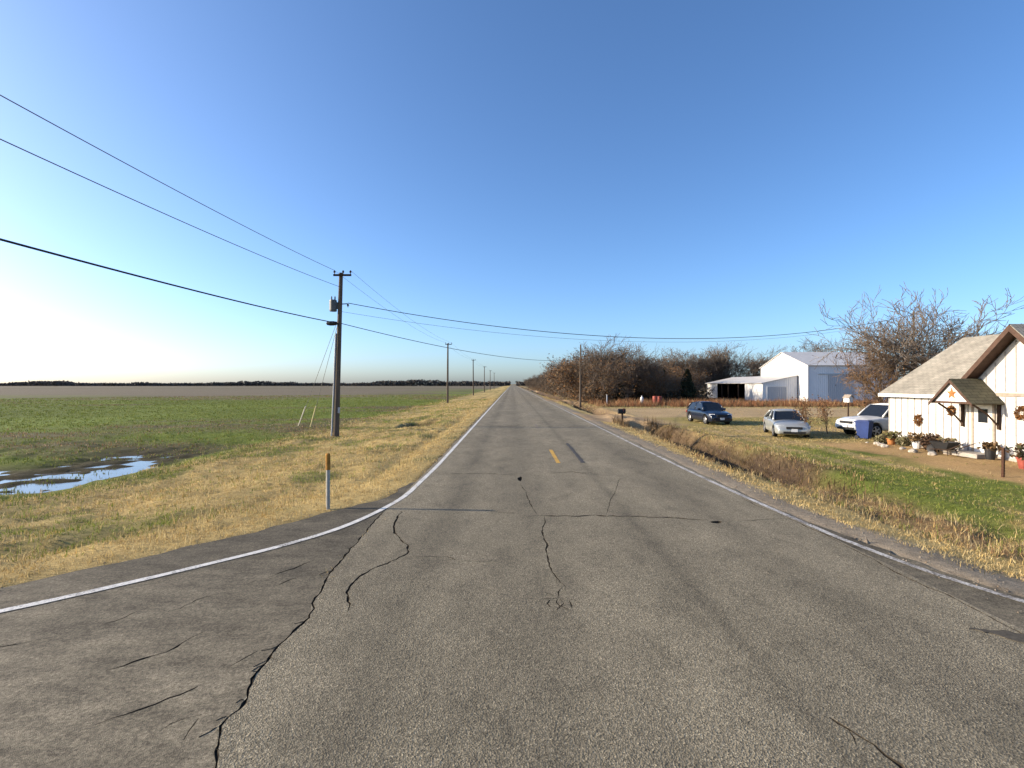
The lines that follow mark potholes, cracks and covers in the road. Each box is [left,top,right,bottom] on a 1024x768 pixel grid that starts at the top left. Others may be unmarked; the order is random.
crack [829,717,905,768]
crack [96,511,495,768]
crack [469,473,699,610]
